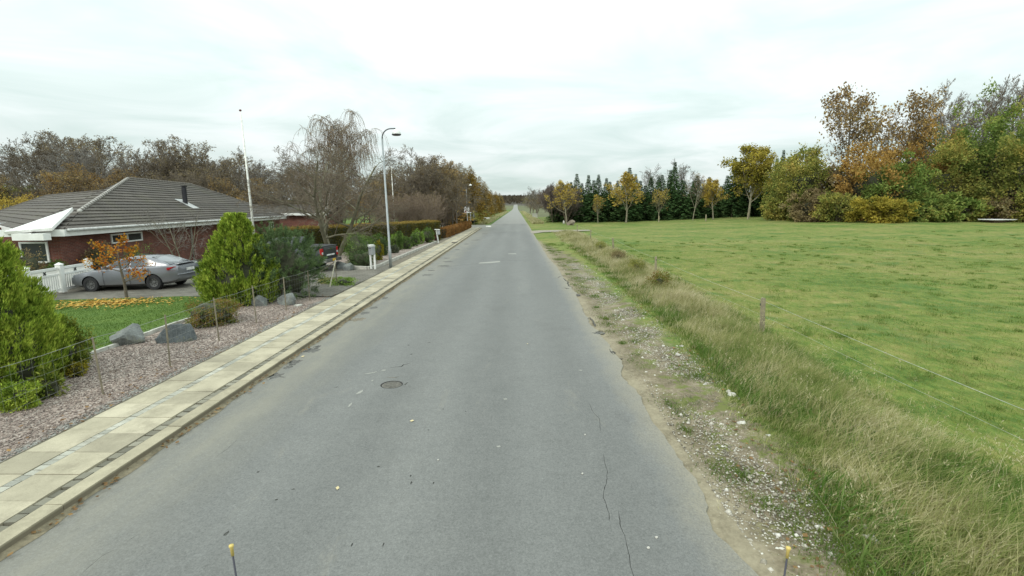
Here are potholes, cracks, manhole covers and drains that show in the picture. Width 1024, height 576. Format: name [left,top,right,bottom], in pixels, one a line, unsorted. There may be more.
manhole cover [380,381,403,389]
crack [603,455,634,576]
